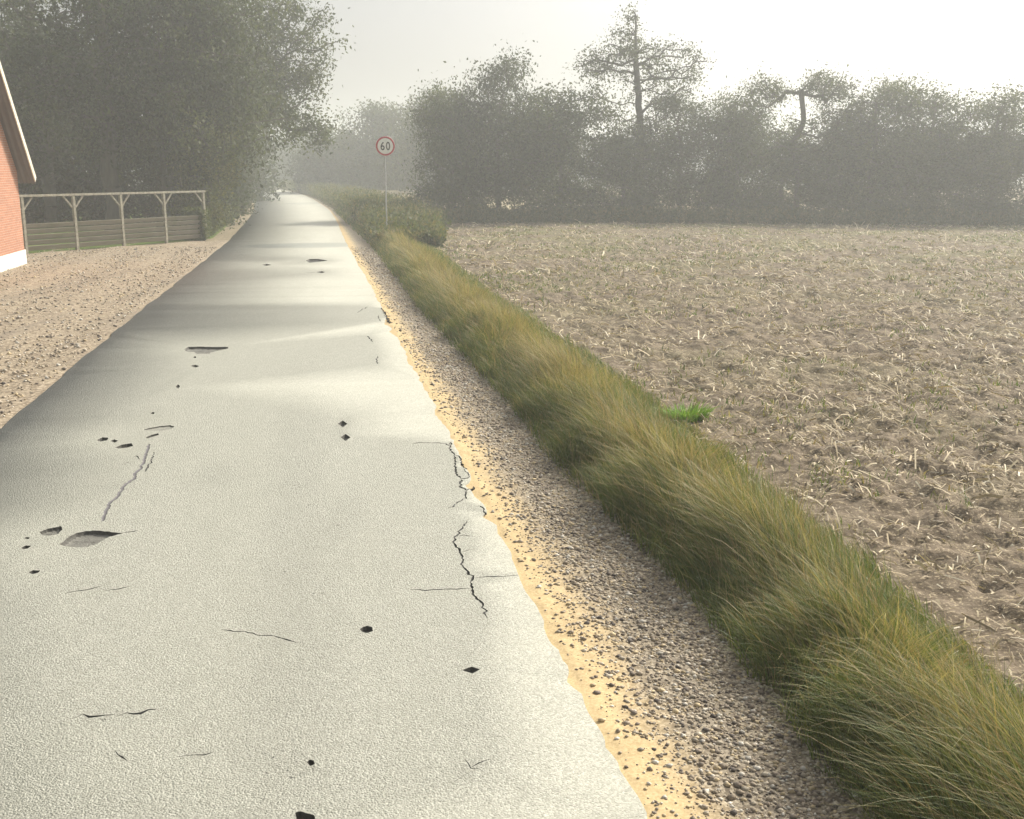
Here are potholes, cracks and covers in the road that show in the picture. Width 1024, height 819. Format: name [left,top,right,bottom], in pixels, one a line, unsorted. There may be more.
crack [227,630,294,642]
crack [101,444,154,533]
crack [413,442,513,617]
pothole [60,530,121,548]
pothole [40,526,62,536]
